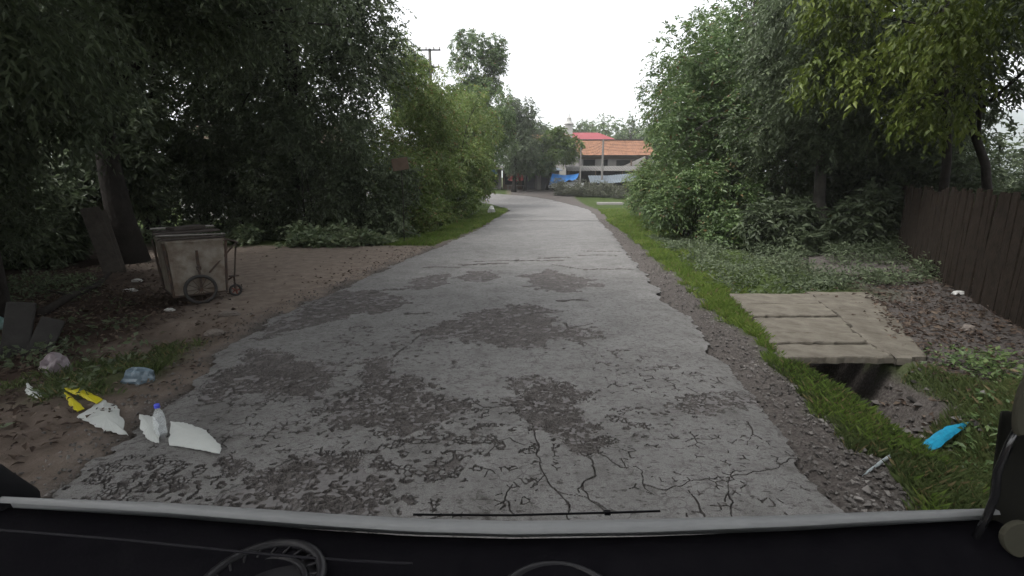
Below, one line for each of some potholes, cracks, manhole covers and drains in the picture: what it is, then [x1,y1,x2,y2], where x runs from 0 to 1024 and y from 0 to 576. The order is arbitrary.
crack [349,322,804,520]
